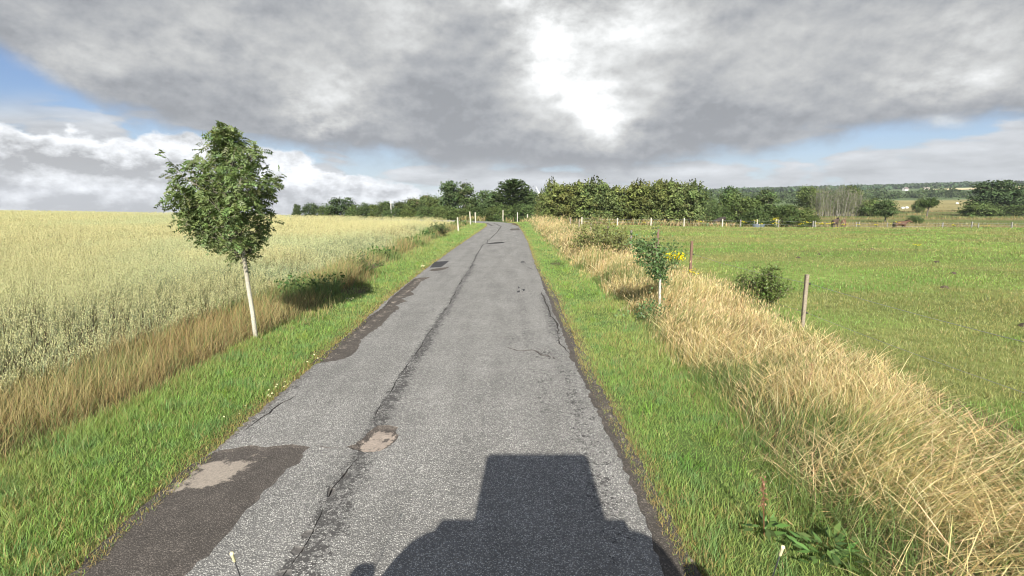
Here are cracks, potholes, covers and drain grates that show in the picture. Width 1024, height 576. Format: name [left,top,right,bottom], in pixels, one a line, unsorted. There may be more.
crack [501,292,569,360]
pothole [347,425,399,452]
crack [275,223,518,576]
crack [245,395,296,430]
